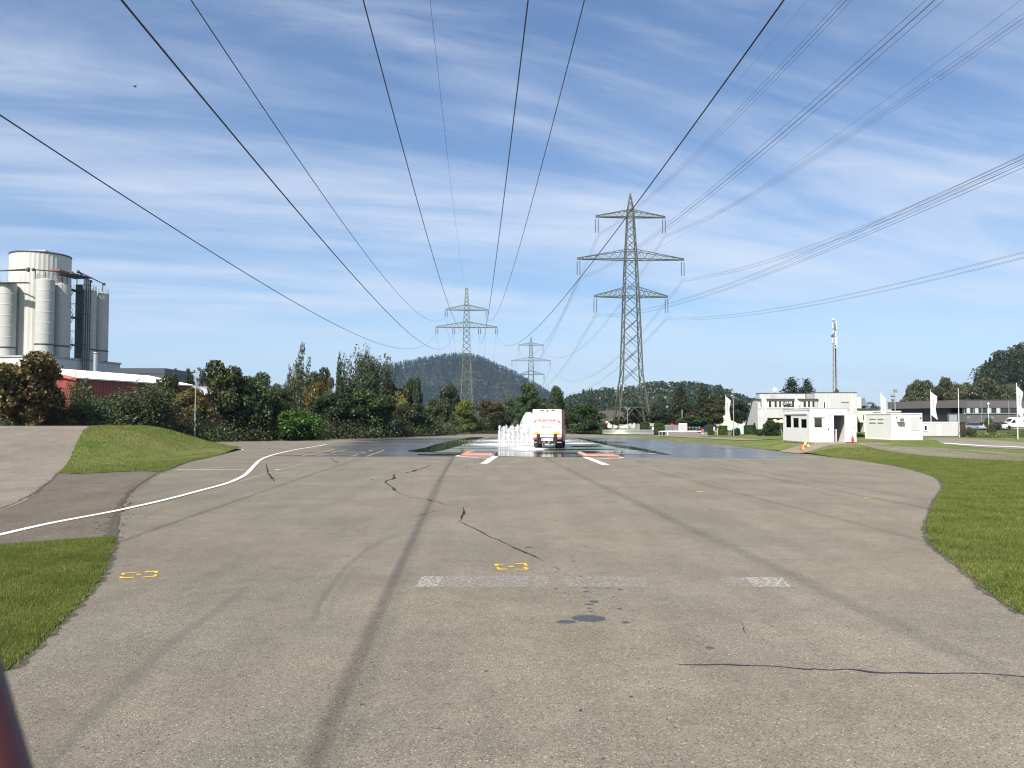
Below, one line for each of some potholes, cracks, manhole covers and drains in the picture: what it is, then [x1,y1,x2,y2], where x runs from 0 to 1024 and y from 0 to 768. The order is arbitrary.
crack [371,465,591,586]
